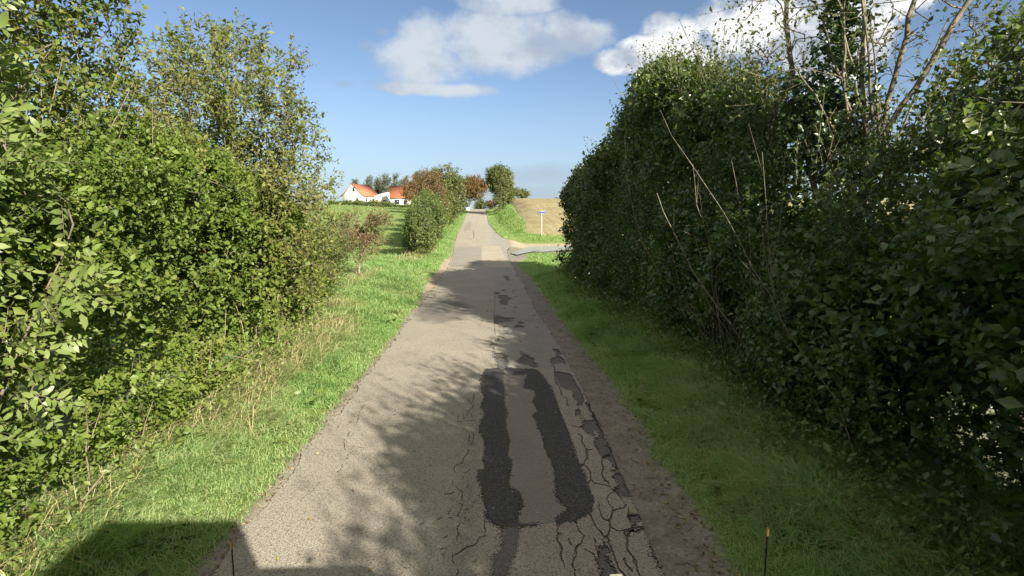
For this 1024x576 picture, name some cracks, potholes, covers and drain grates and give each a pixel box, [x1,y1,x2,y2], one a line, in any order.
pothole [490,349,509,369]
crack [550,349,663,576]
pothole [516,351,538,367]
crack [437,395,486,576]
